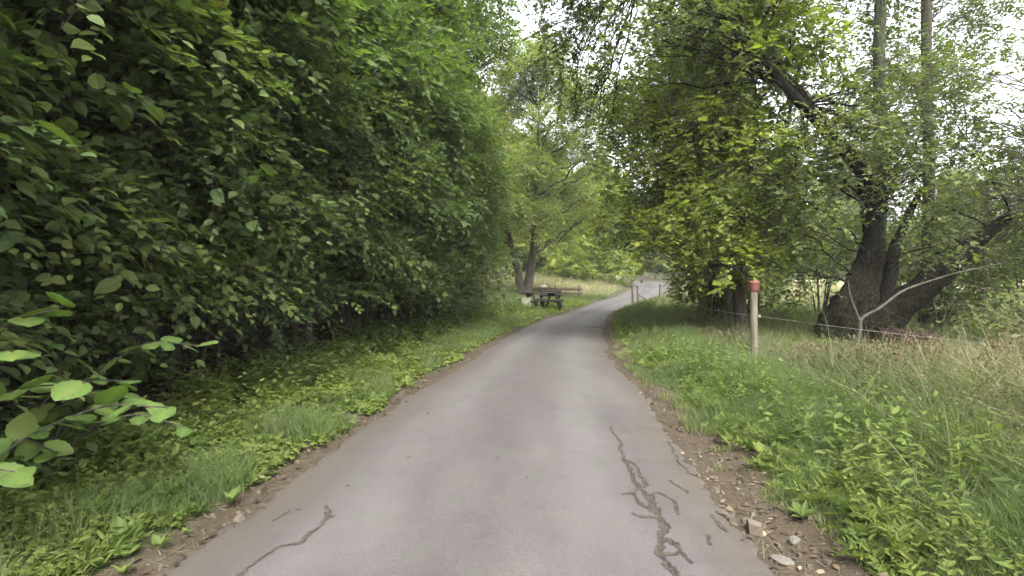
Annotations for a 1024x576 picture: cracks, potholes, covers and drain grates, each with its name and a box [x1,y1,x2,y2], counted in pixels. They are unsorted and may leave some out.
crack [610,425,728,576]
crack [234,504,334,576]
